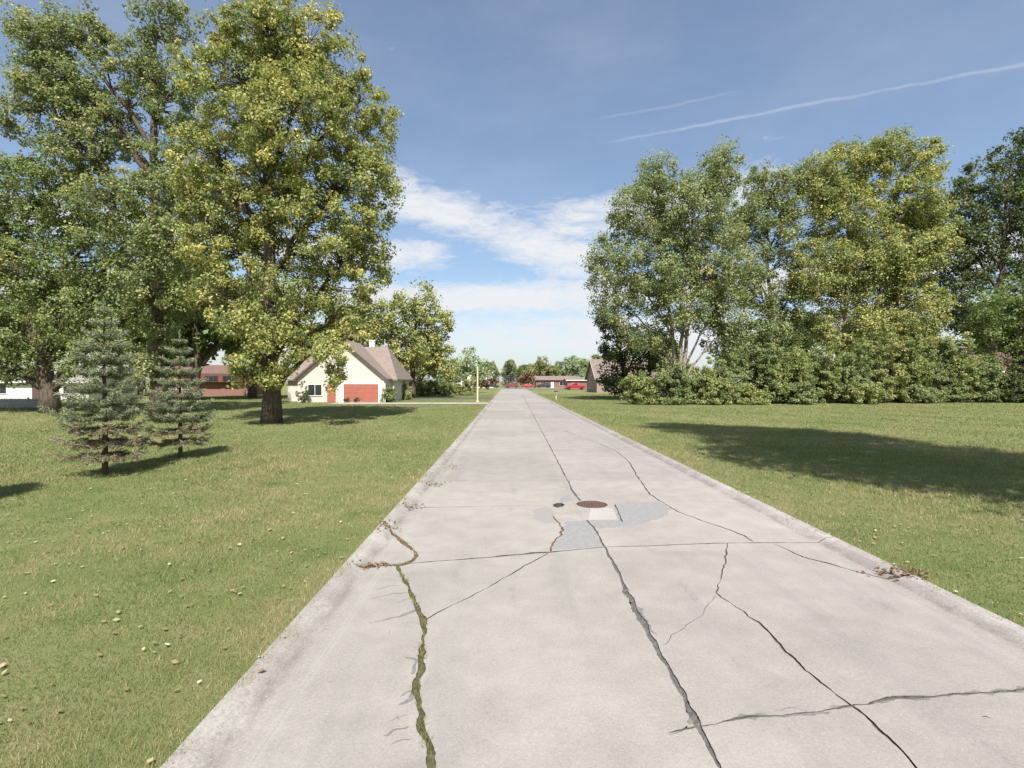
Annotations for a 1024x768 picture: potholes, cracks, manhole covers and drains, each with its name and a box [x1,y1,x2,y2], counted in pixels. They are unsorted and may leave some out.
crack [355,515,564,768]
crack [564,430,917,768]
